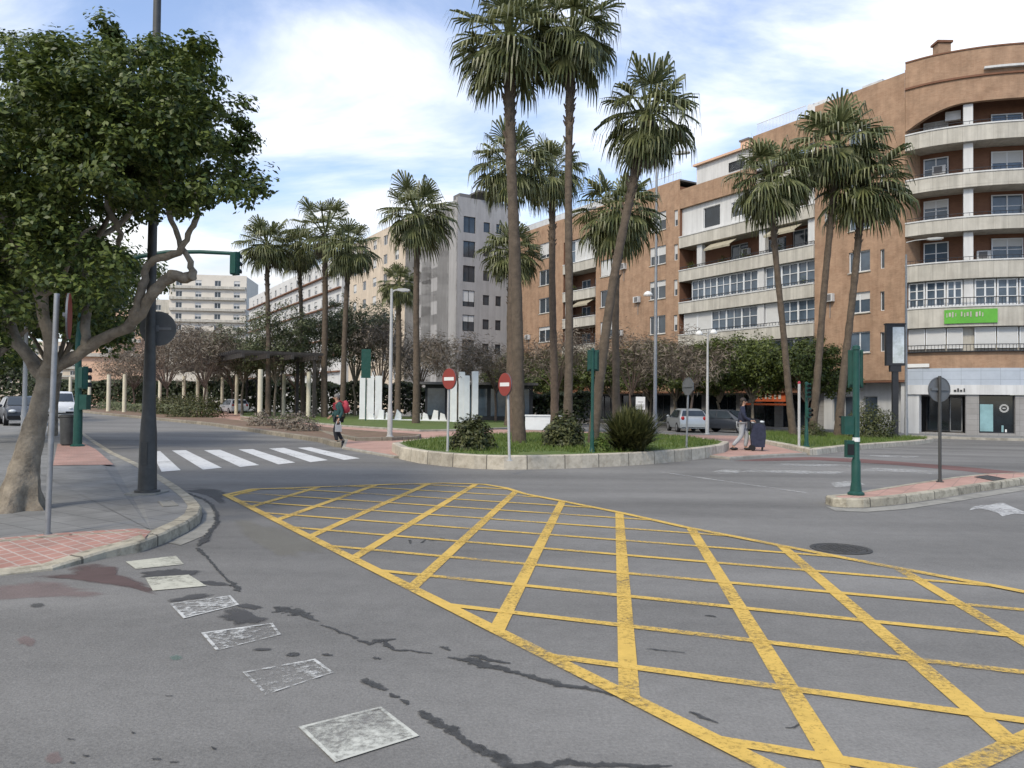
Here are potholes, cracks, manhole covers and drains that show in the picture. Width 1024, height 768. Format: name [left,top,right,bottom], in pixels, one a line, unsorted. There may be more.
manhole cover [810,543,873,555]
